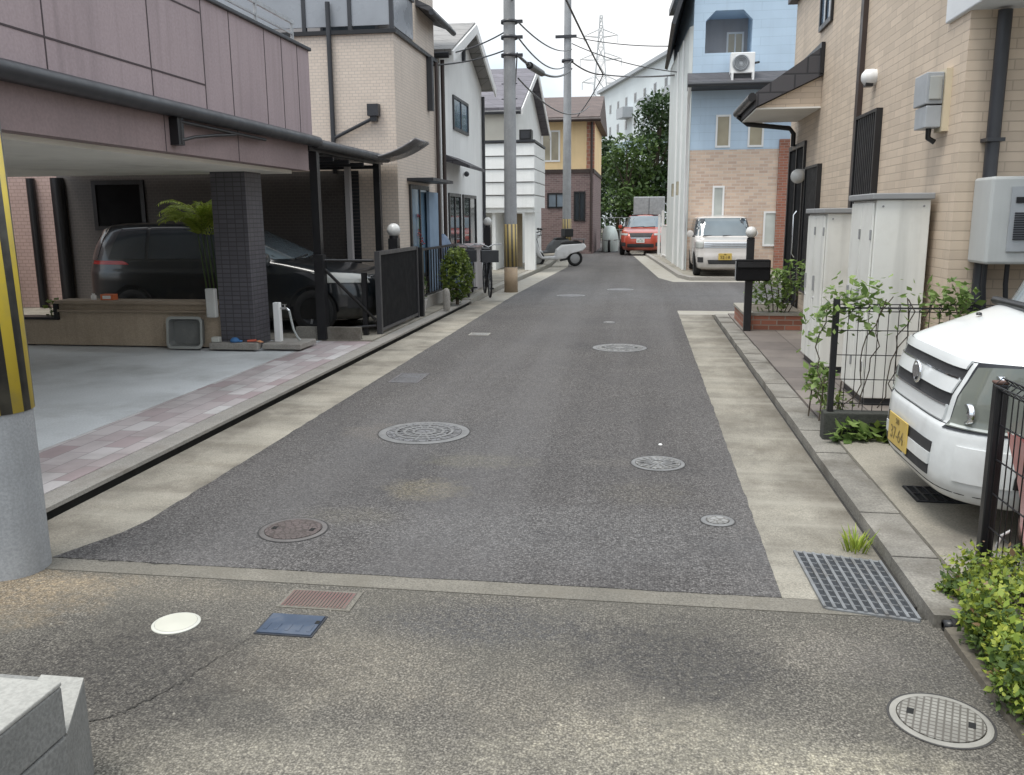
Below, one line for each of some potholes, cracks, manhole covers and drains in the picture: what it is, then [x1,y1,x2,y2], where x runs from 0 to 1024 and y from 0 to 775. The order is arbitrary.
manhole cover [630,456,686,471]
utility cover [388,373,430,383]
crack [89,640,245,721]
manhole cover [257,518,329,542]
drain grate [793,550,921,623]
manhole cover [886,692,998,750]
manhole cover [593,344,647,352]
manhole cover [377,421,471,444]
drain grate [902,485,969,504]
utility cover [699,514,736,527]
